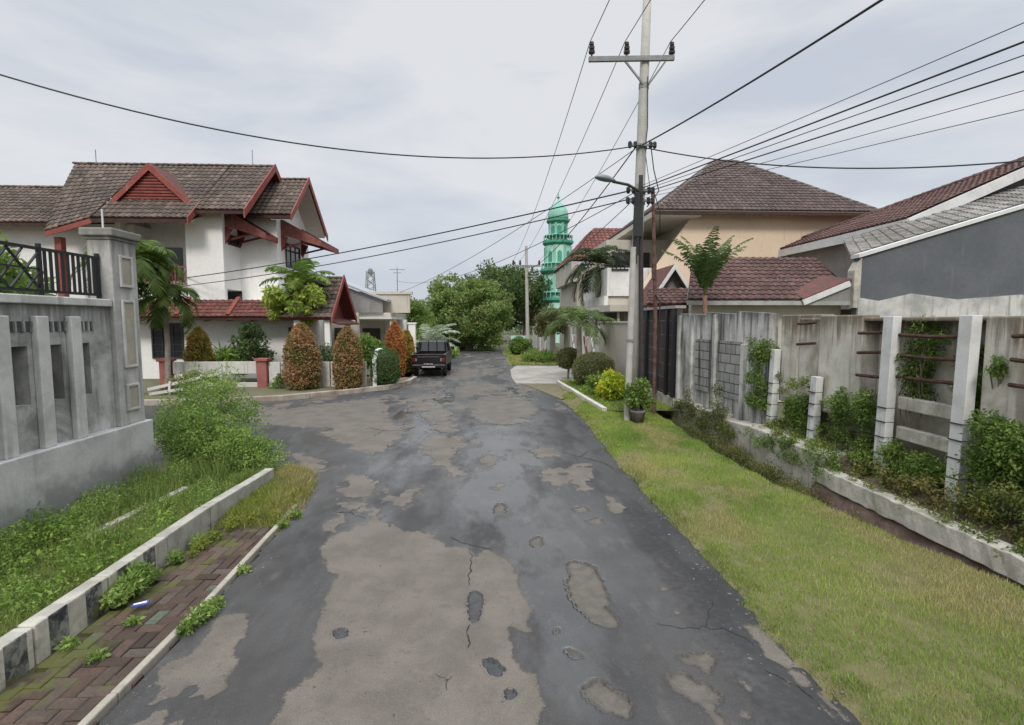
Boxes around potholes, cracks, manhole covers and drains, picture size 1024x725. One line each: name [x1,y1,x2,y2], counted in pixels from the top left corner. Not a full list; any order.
crack [657,602,754,646]
pothole [564,560,621,628]
pothole [330,627,351,640]
pothole [529,536,544,548]
pothole [580,678,635,720]
pothole [493,503,507,514]
pothole [502,687,519,702]
pothole [564,648,582,659]
pothole [663,670,734,725]
pothole [466,590,486,624]
pothole [480,657,508,678]
